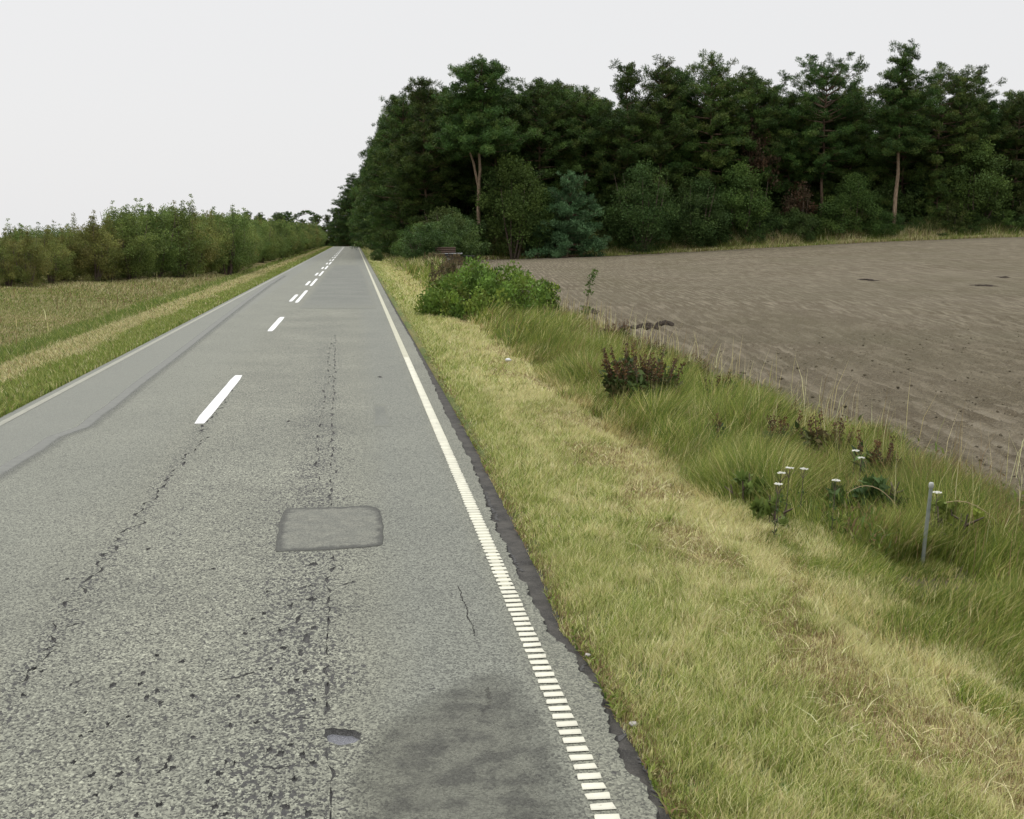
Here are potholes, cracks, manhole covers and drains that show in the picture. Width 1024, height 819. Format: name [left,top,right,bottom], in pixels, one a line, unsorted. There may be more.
crack [325,749,336,819]
crack [15,389,233,690]
crack [313,335,337,506]
crack [296,556,356,723]
pothole [324,728,362,745]
crack [458,586,475,636]
